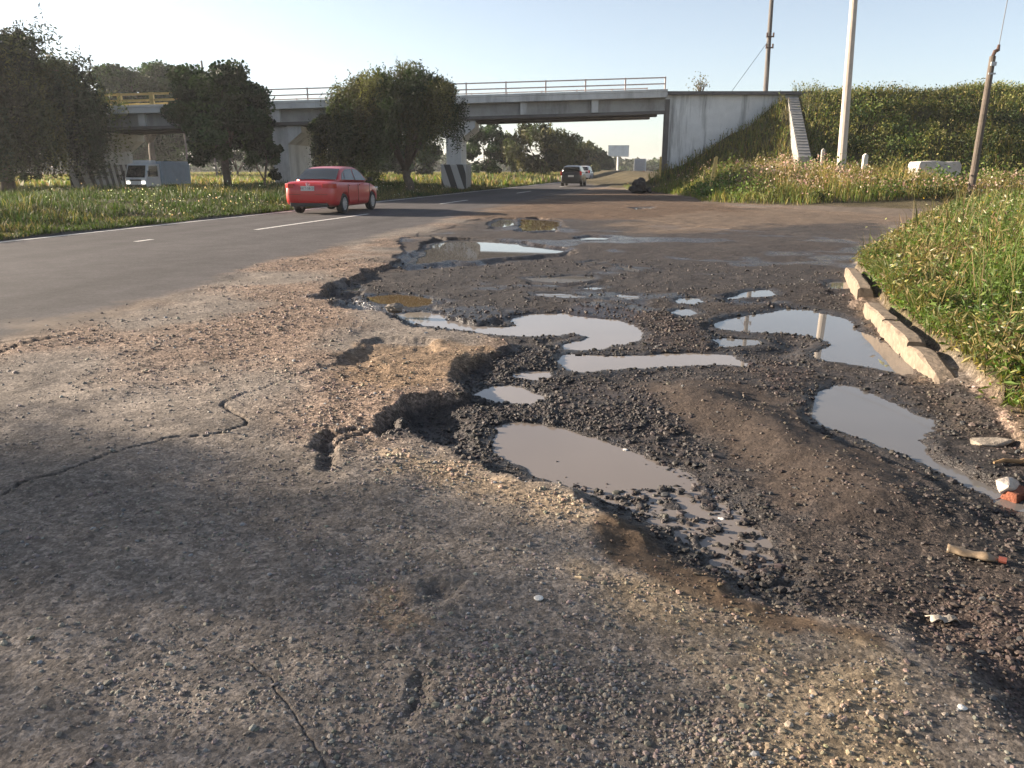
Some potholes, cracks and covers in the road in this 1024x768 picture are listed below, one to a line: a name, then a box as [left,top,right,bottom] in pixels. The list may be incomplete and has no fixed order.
pothole [799,392,1024,523]
pothole [386,311,765,381]
pothole [513,217,569,233]
pothole [700,310,927,384]
crack [172,623,328,768]
pothole [449,346,562,415]
pothole [371,390,803,606]
pothole [485,217,521,229]
pothole [395,235,578,271]
crack [0,363,337,497]
